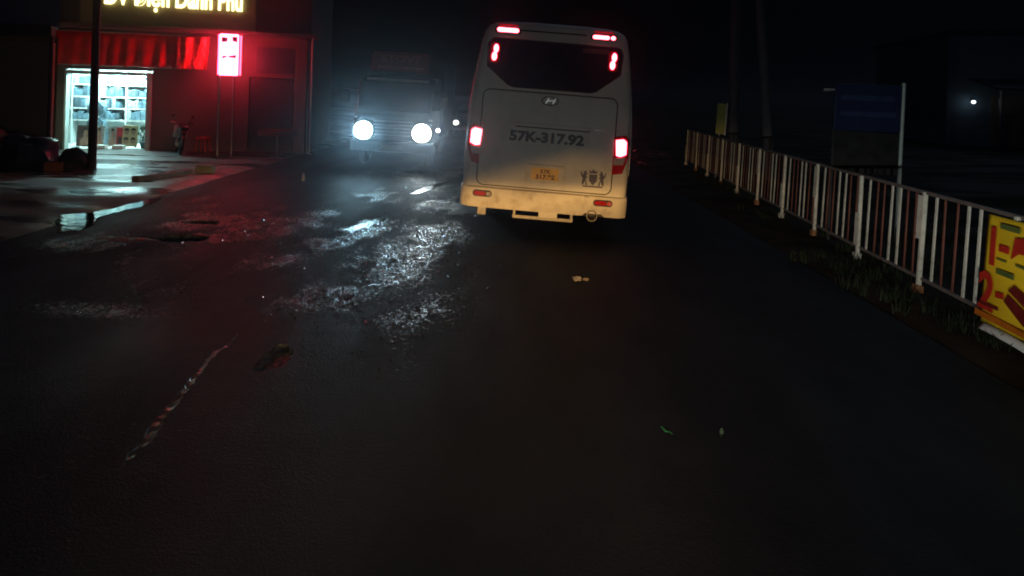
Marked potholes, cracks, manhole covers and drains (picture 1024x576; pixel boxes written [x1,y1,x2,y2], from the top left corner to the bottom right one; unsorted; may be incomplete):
pothole [148,234,210,243]
crack [117,333,239,473]
pothole [252,344,293,372]
